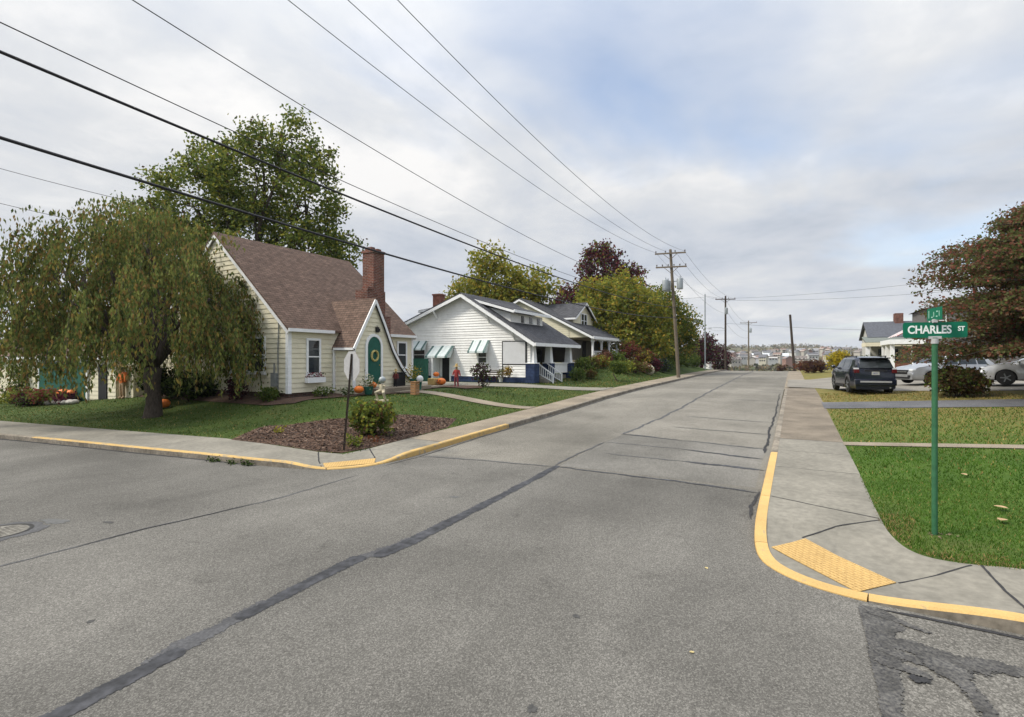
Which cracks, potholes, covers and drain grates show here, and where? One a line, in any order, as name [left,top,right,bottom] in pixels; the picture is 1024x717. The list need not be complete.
manhole cover [0,523,34,538]
crack [608,392,780,470]
crack [748,492,760,519]
